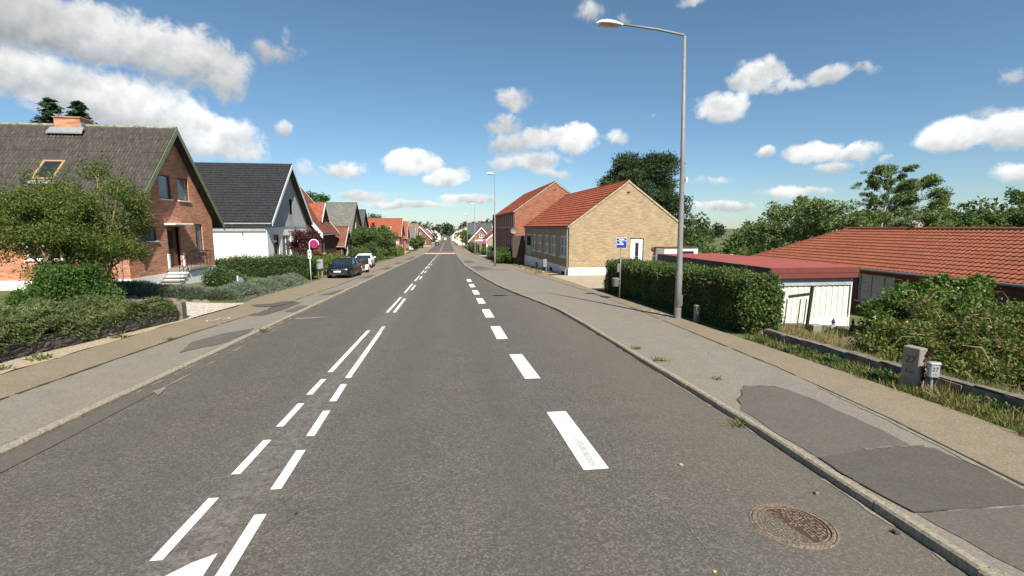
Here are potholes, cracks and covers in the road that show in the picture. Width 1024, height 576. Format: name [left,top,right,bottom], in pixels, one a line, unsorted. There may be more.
crack [627,474,729,576]
manhole cover [749,503,840,550]
